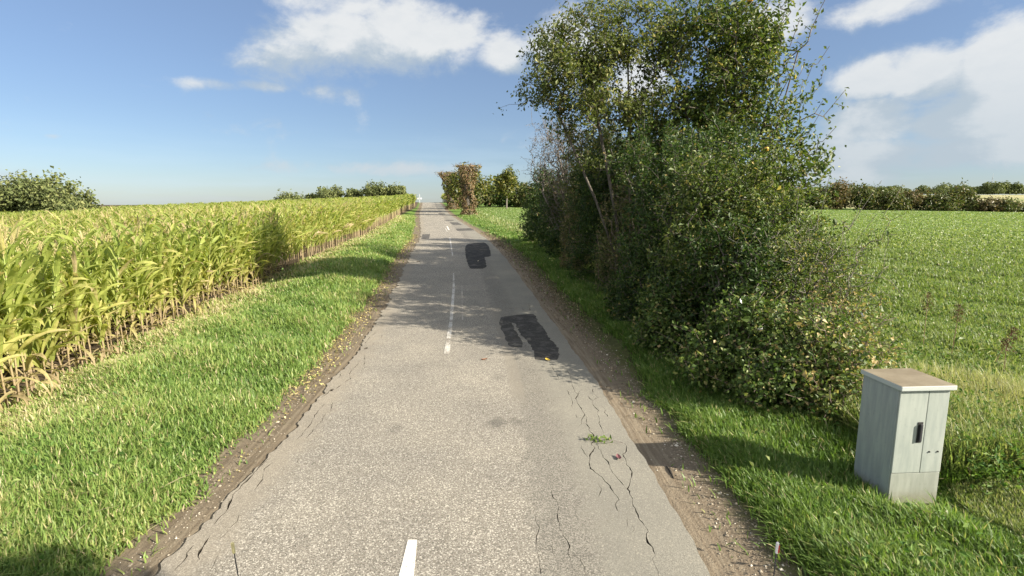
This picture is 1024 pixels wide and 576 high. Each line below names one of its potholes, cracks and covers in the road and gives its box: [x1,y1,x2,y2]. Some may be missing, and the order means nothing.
crack [184,460,269,571]
crack [551,363,659,576]
crack [535,495,586,574]
